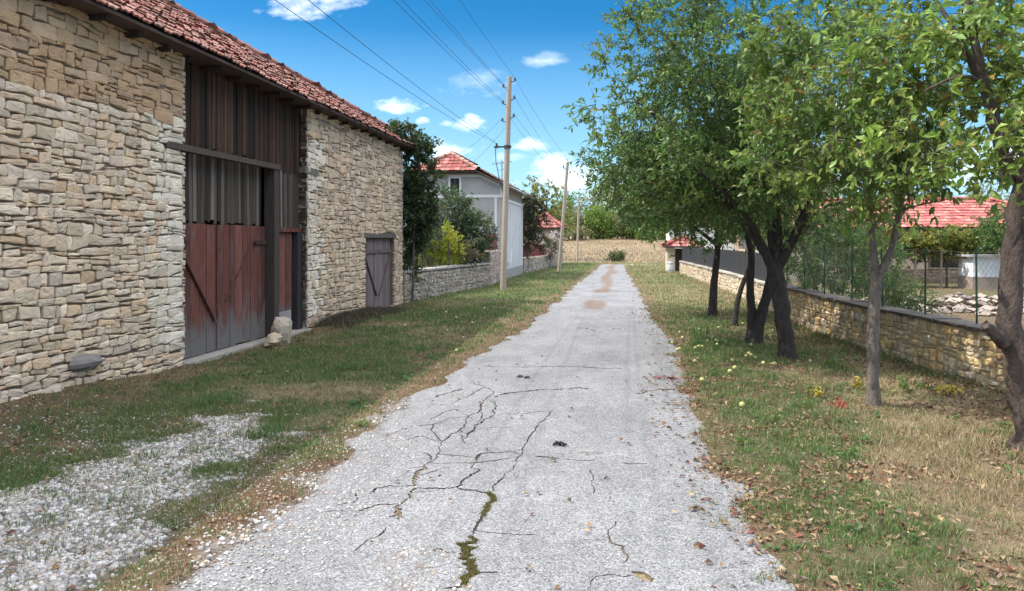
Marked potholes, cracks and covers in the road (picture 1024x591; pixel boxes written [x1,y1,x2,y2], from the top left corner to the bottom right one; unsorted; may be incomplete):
crack [328,381,595,589]
crack [590,521,632,587]
